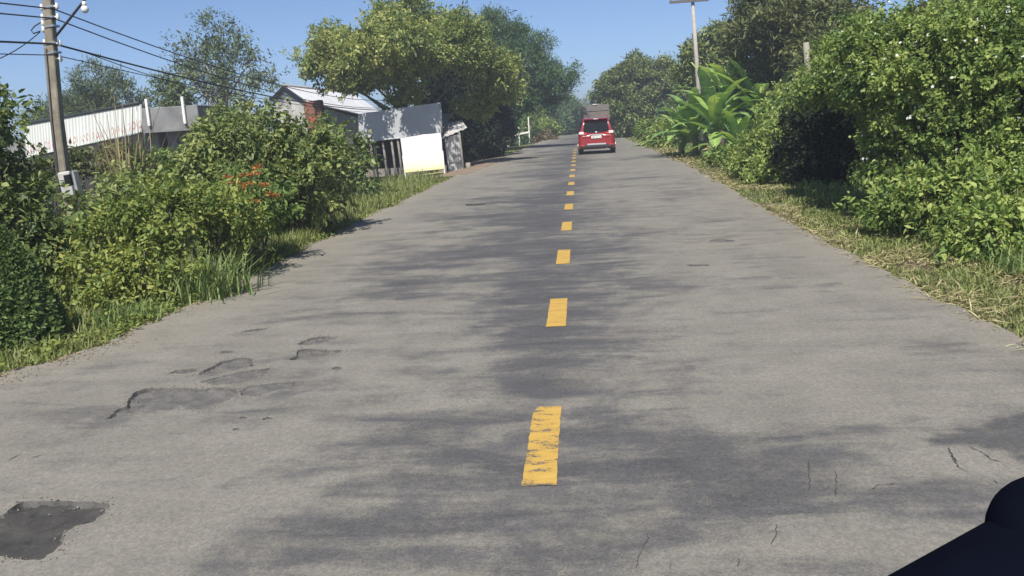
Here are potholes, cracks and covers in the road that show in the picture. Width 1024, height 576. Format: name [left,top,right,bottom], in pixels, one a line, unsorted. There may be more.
pothole [199,358,253,376]
pothole [0,500,109,560]
pothole [298,336,335,345]
pothole [240,382,295,396]
pothole [200,368,270,385]
pothole [289,349,342,361]
pothole [107,387,238,419]
crack [948,446,1002,483]
